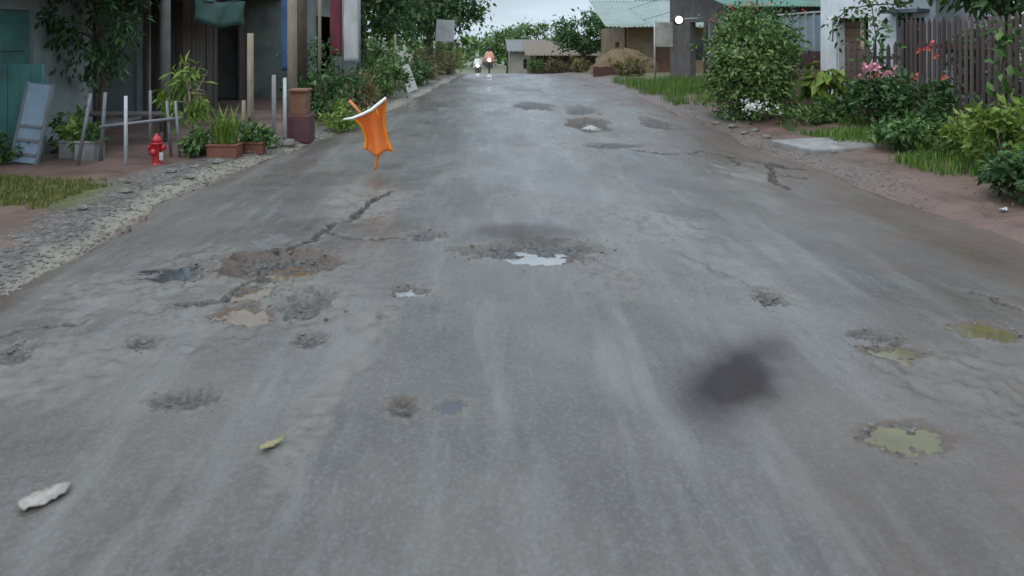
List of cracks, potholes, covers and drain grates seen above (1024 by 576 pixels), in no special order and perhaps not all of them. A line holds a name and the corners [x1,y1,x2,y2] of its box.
pothole [385,395,421,419]
crack [632,149,809,190]
pothole [138,380,229,417]
pothole [257,286,350,324]
pothole [431,398,468,417]
pothole [564,117,614,133]
pothole [192,297,285,327]
pothole [851,340,949,366]
pothole [845,418,964,464]
crack [265,190,408,257]
pothole [944,318,1024,348]
pothole [748,289,792,308]
